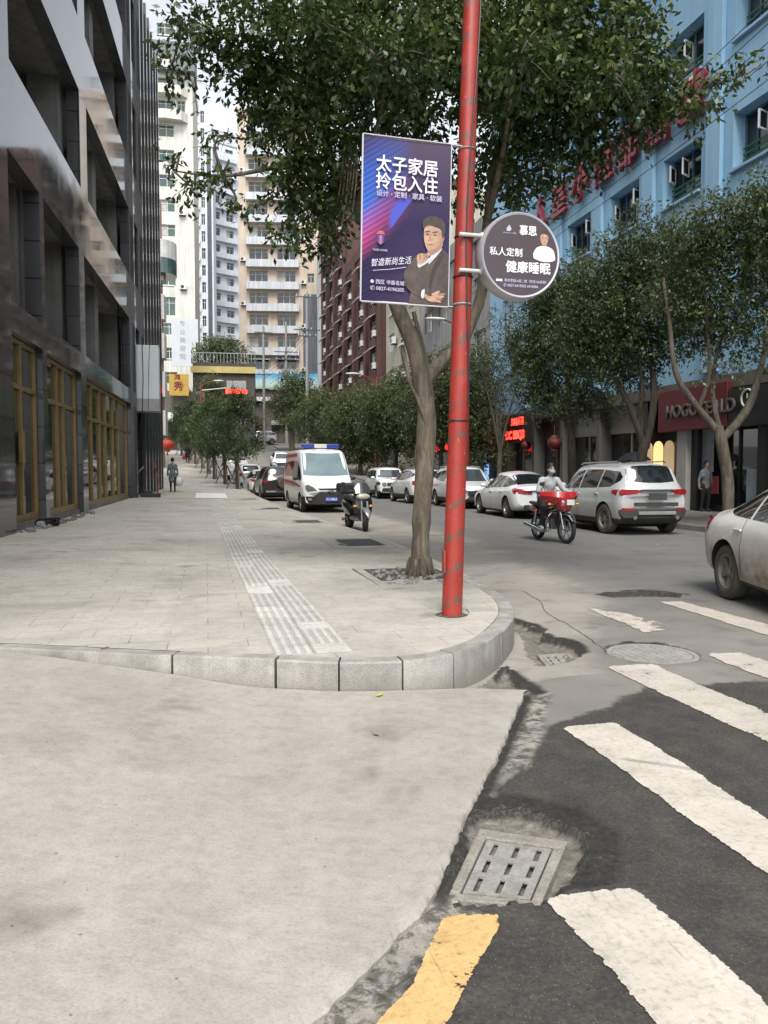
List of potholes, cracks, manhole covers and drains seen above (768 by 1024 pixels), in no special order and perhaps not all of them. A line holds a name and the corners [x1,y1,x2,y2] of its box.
pothole [514,619,583,667]
pothole [478,666,532,694]
manhole cover [605,644,701,664]
